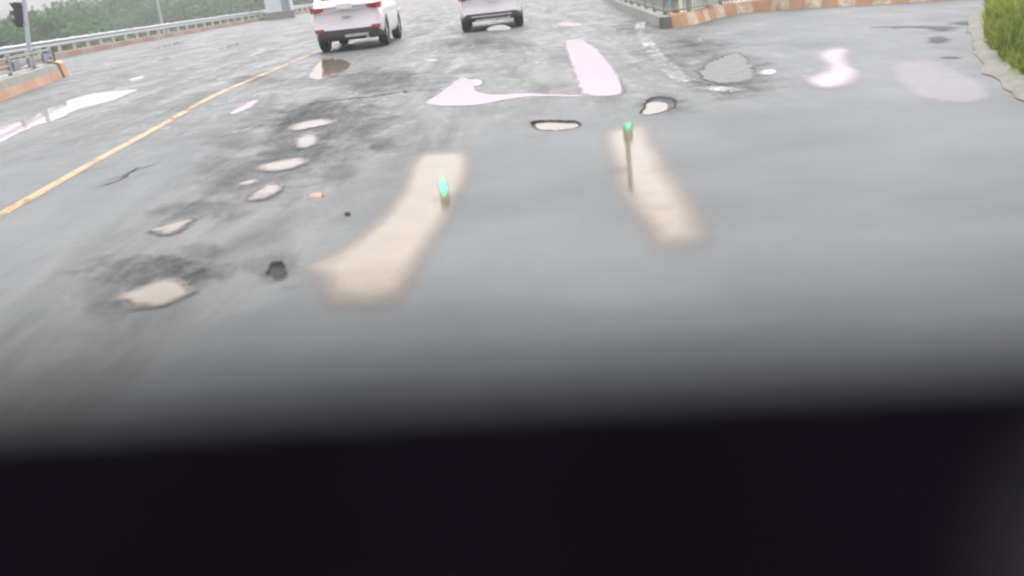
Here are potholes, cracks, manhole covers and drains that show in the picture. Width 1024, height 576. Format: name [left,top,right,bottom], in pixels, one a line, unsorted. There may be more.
pothole [147,218,198,236]
pothole [530,120,582,131]
crack [94,163,156,188]
pothole [260,261,290,280]
pothole [259,158,308,172]
pothole [291,133,320,150]
pothole [287,119,333,131]
pothole [117,279,198,311]
pothole [639,96,677,115]
pothole [244,182,286,202]
